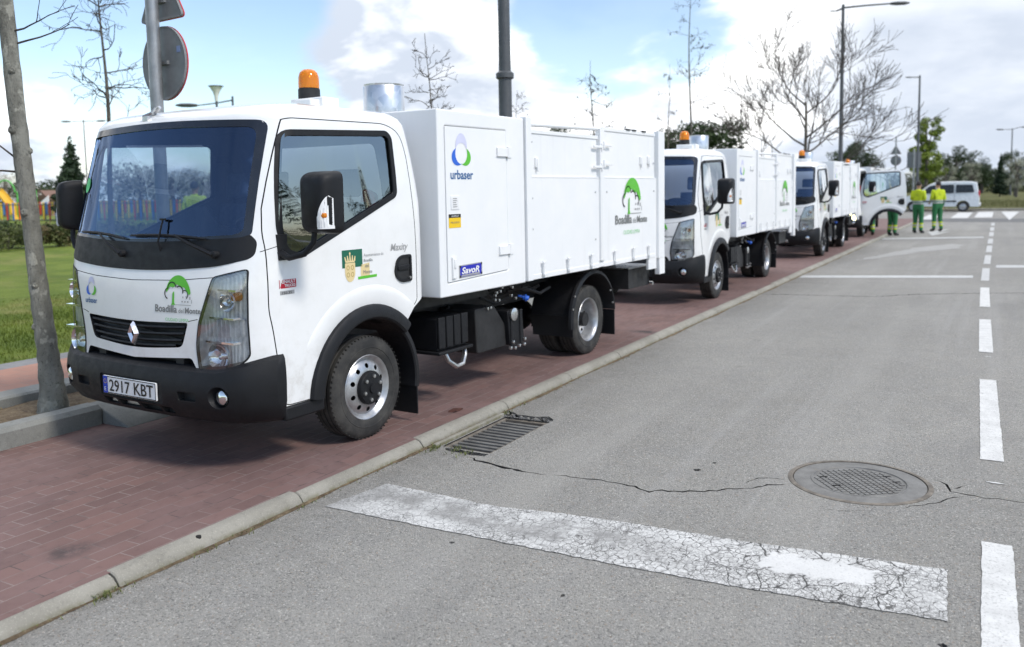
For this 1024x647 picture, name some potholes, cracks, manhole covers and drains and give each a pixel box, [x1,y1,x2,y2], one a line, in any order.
crack [470,457,538,474]
crack [907,481,1024,508]
drain grate [434,413,547,473]
crack [557,475,784,493]
manhole cover [788,460,934,511]
